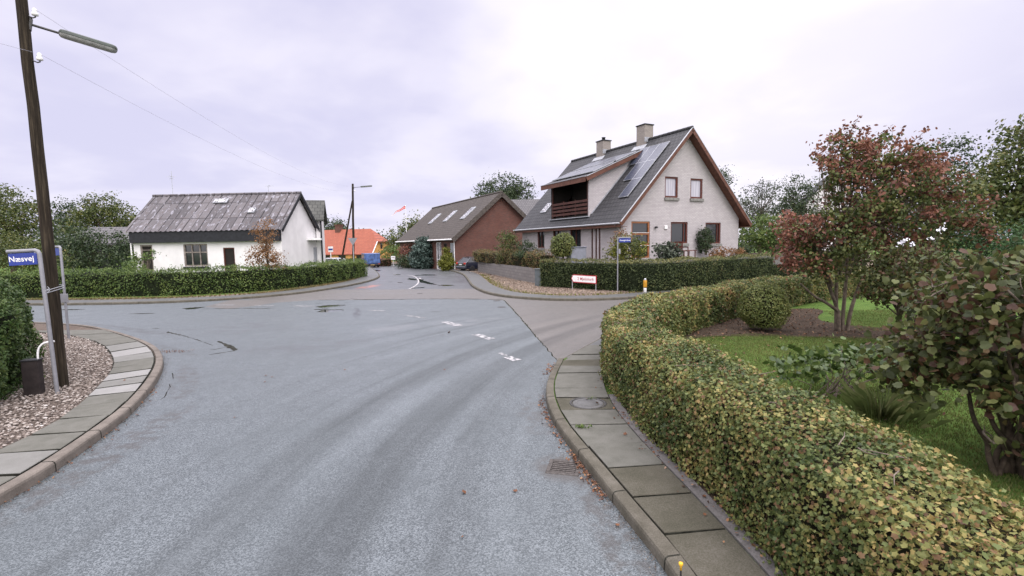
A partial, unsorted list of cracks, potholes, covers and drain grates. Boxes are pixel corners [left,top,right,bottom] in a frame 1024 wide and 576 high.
manhole cover [570,397,607,409]
drain grate [545,459,582,476]
crack [154,328,238,355]
